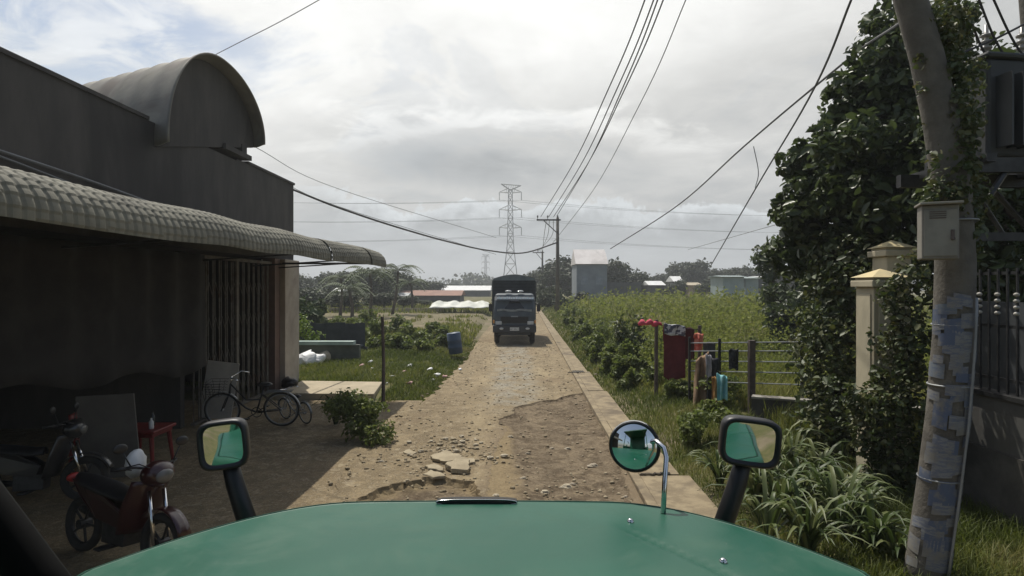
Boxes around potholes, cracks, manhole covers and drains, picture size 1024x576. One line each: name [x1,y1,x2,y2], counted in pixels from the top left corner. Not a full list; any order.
pothole [357,477,482,501]
